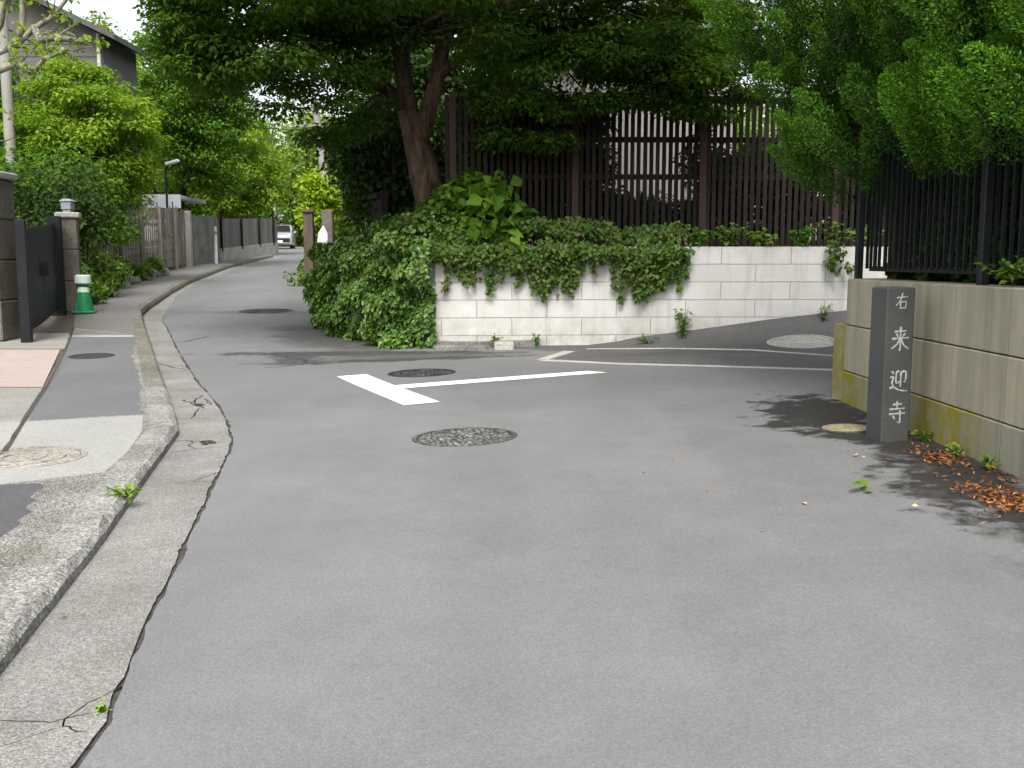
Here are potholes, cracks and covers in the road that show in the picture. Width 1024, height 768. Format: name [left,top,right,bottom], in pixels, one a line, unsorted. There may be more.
manhole cover [412,427,517,447]
manhole cover [820,424,866,433]
manhole cover [767,334,834,348]
manhole cover [387,368,456,377]
manhole cover [0,446,88,470]
crack [0,315,234,768]
